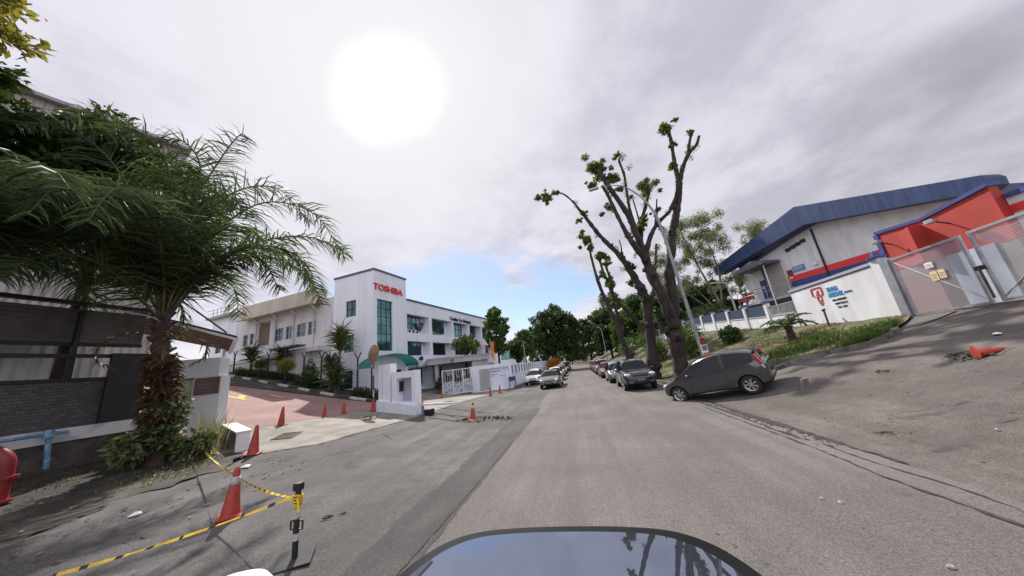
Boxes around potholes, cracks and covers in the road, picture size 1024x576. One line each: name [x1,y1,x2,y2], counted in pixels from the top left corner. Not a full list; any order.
pothole [939,347,1017,363]
pothole [455,413,515,423]
